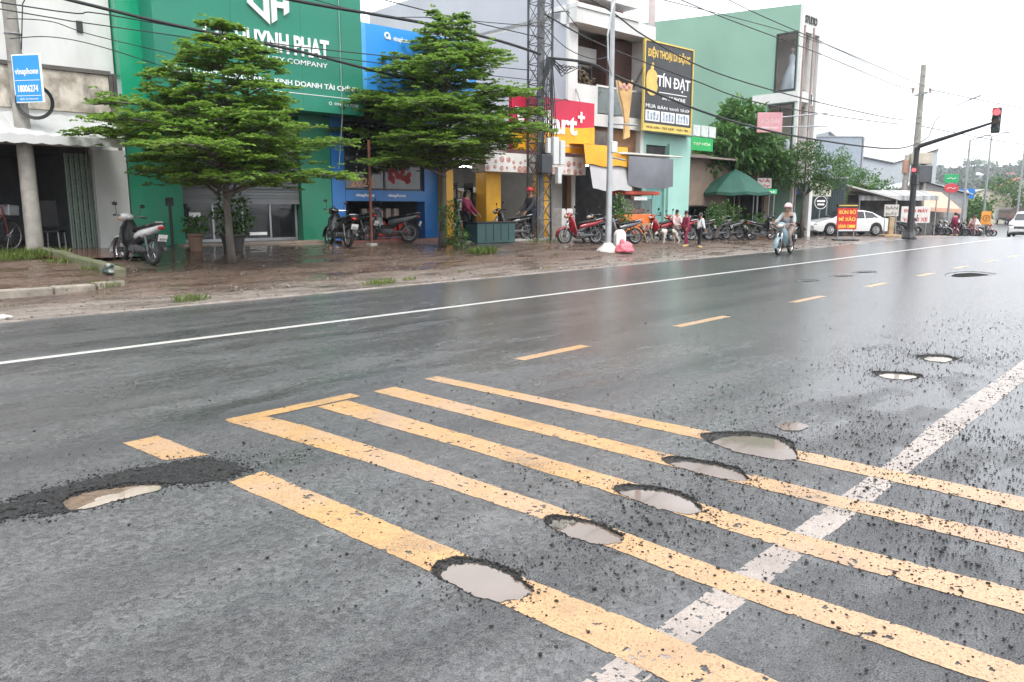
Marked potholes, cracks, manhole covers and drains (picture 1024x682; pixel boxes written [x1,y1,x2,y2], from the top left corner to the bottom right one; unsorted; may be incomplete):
pothole [700,430,800,461]
pothole [542,513,624,545]
pothole [872,371,923,380]
pothole [429,554,534,603]
pothole [661,456,749,481]
pothole [916,354,959,363]
pothole [612,483,703,515]
